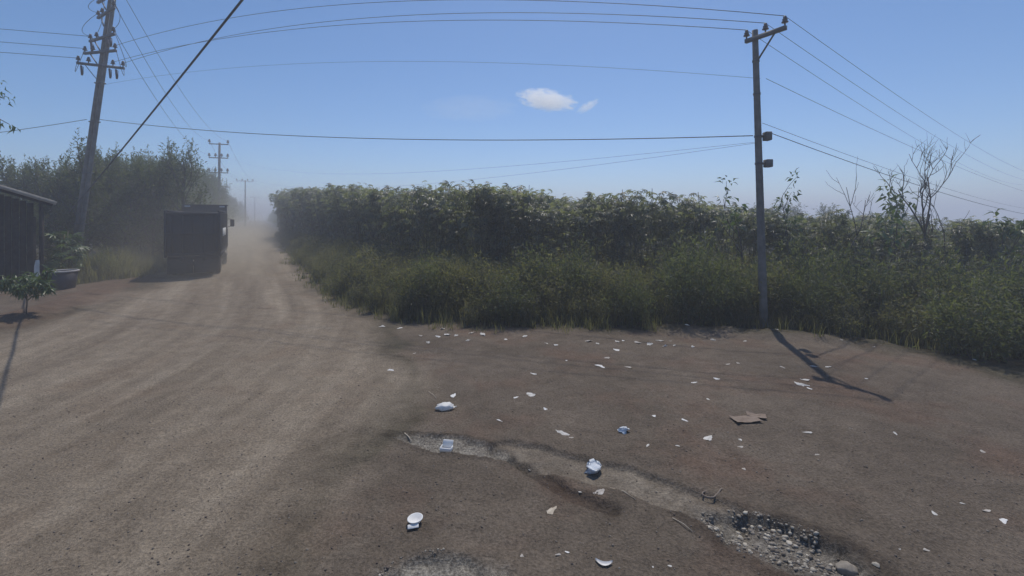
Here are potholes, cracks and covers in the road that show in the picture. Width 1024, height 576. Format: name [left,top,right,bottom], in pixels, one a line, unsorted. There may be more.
pothole [368,547,517,576]
pothole [393,431,516,467]
pothole [686,502,884,576]
